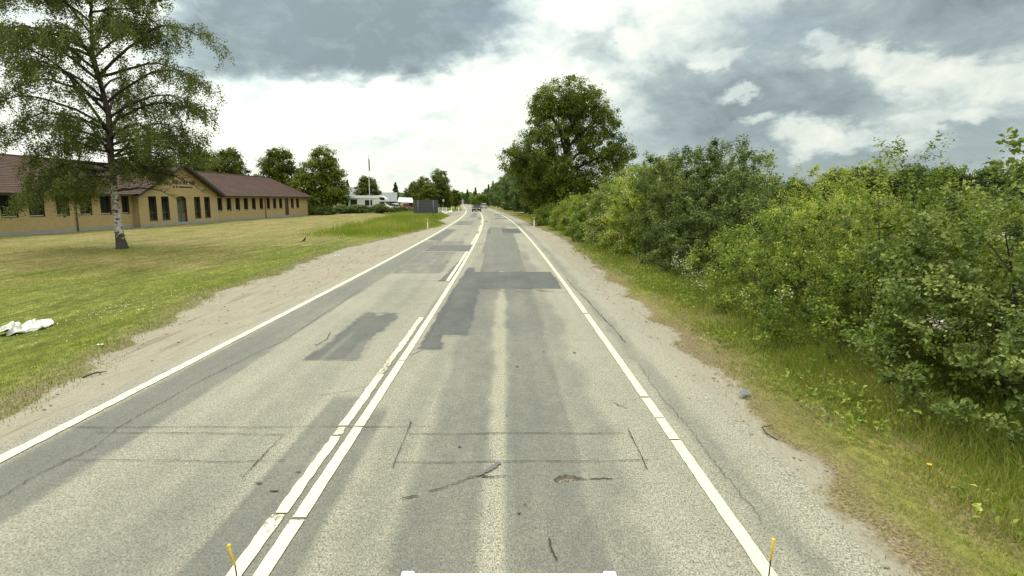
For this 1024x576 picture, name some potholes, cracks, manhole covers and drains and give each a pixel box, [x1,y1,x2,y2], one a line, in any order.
crack [0,290,647,497]
pothole [553,474,587,483]
